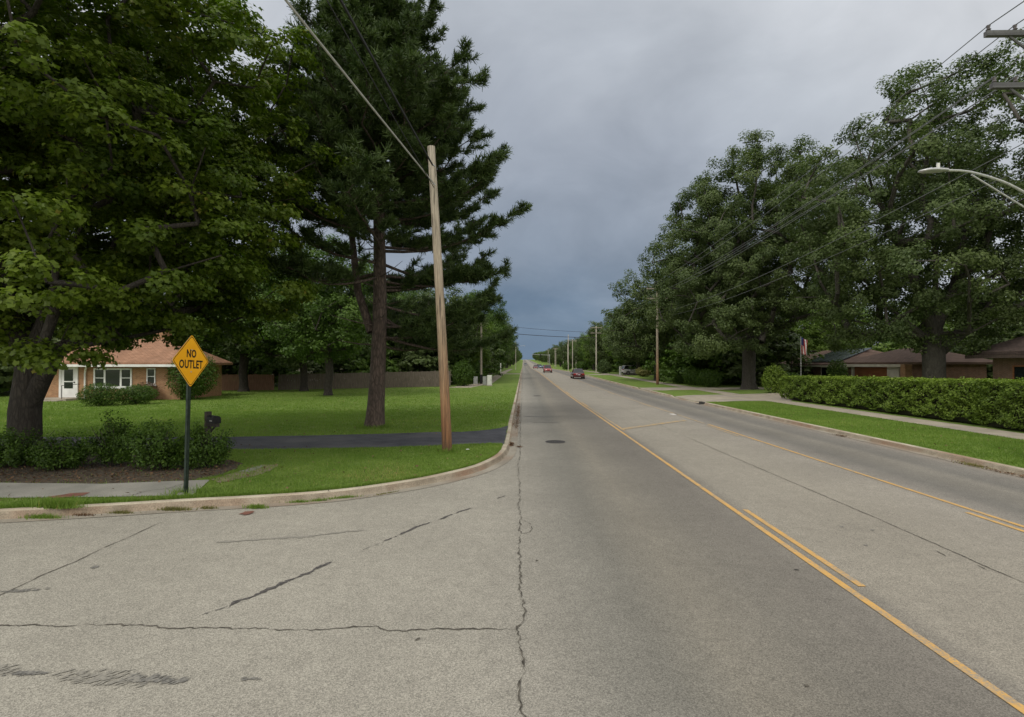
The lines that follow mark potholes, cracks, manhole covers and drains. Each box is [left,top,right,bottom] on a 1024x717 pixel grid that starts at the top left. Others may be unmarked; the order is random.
crack [2,606,508,631]
crack [363,506,475,550]
crack [497,399,533,717]
